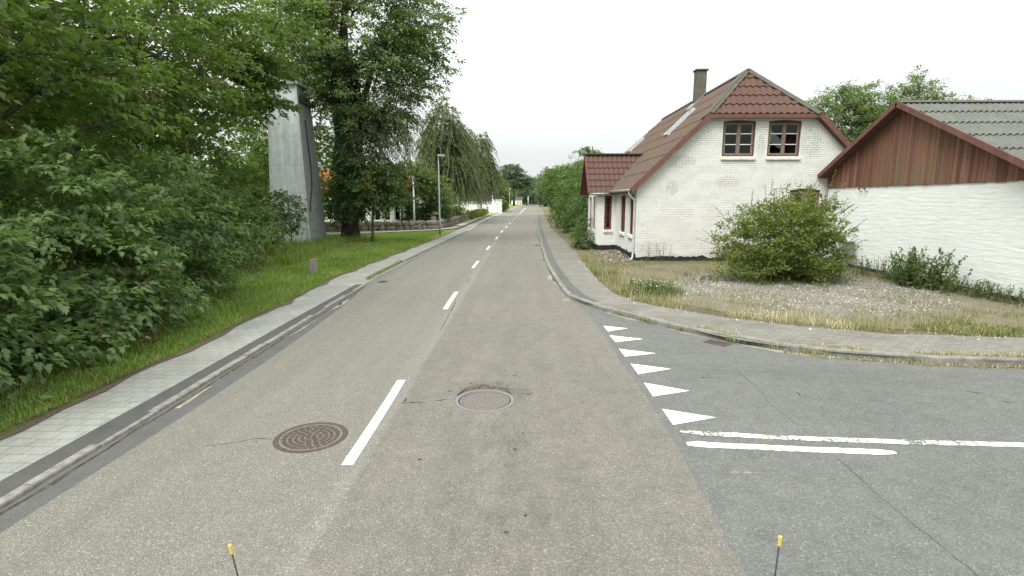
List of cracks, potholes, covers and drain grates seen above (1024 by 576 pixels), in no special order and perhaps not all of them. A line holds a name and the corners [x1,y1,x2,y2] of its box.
manhole cover [273,422,348,453]
manhole cover [455,390,514,412]
drain grate [703,339,732,347]
crack [739,372,978,576]
